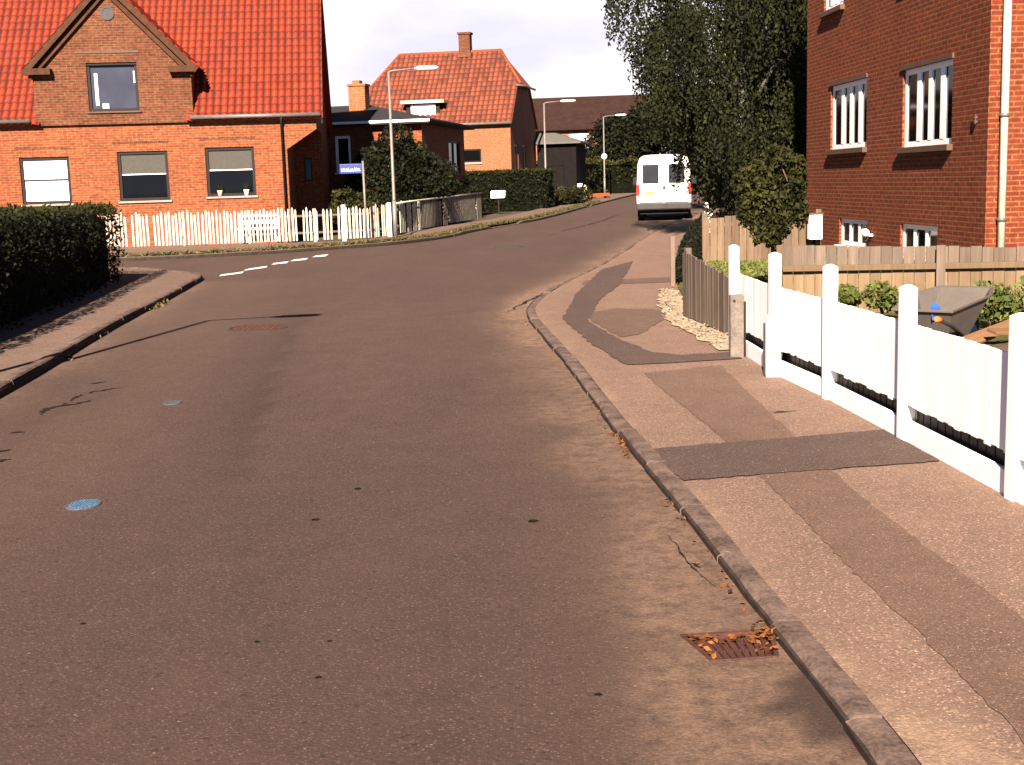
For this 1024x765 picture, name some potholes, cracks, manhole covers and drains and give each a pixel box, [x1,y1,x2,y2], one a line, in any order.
manhole cover [227,324,288,332]
manhole cover [65,499,102,510]
drain grate [680,618,780,661]
crack [0,381,121,462]
crack [668,535,716,587]
